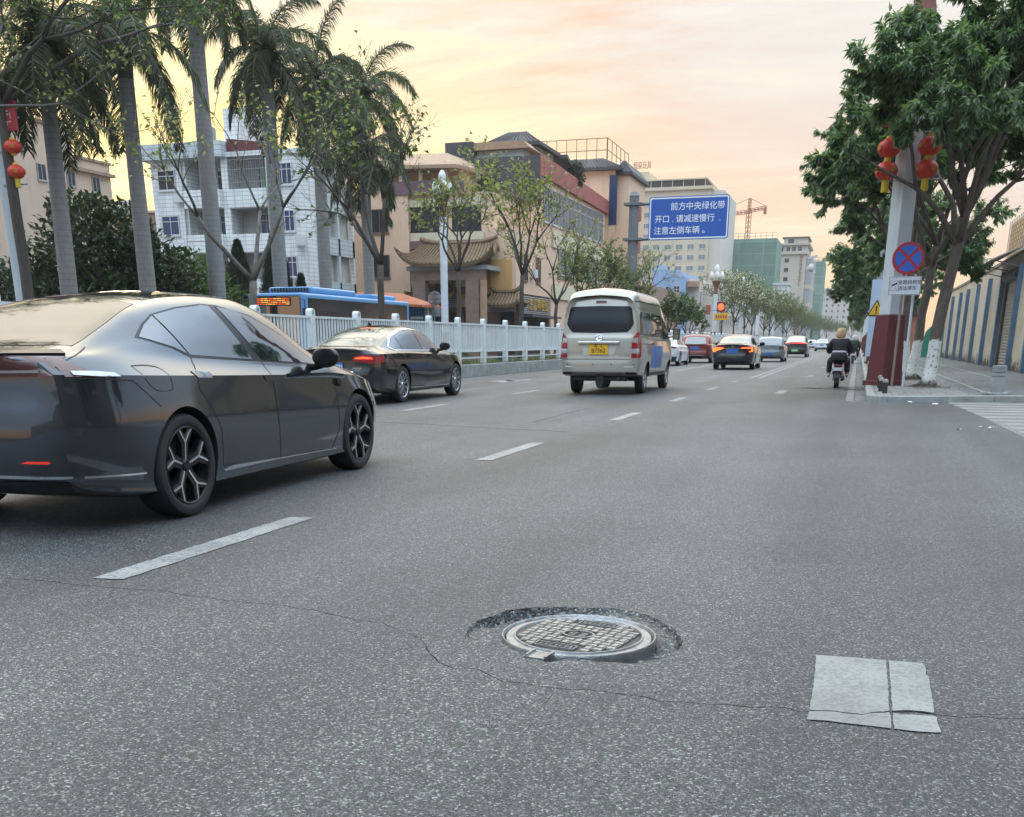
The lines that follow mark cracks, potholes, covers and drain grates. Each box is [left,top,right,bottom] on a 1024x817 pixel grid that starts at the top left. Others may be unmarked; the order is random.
crack [0,578,1024,719]
manhole cover [502,614,656,663]
